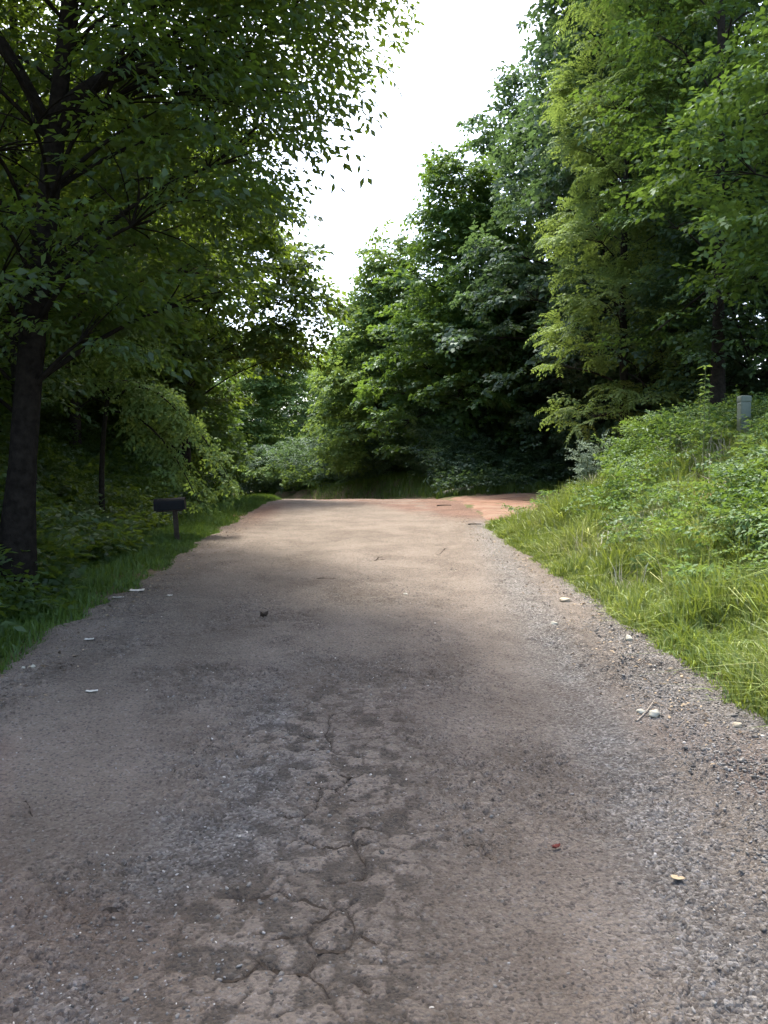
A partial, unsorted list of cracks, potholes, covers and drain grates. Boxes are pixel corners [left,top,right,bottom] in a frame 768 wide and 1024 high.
crack [221,712,381,999]
